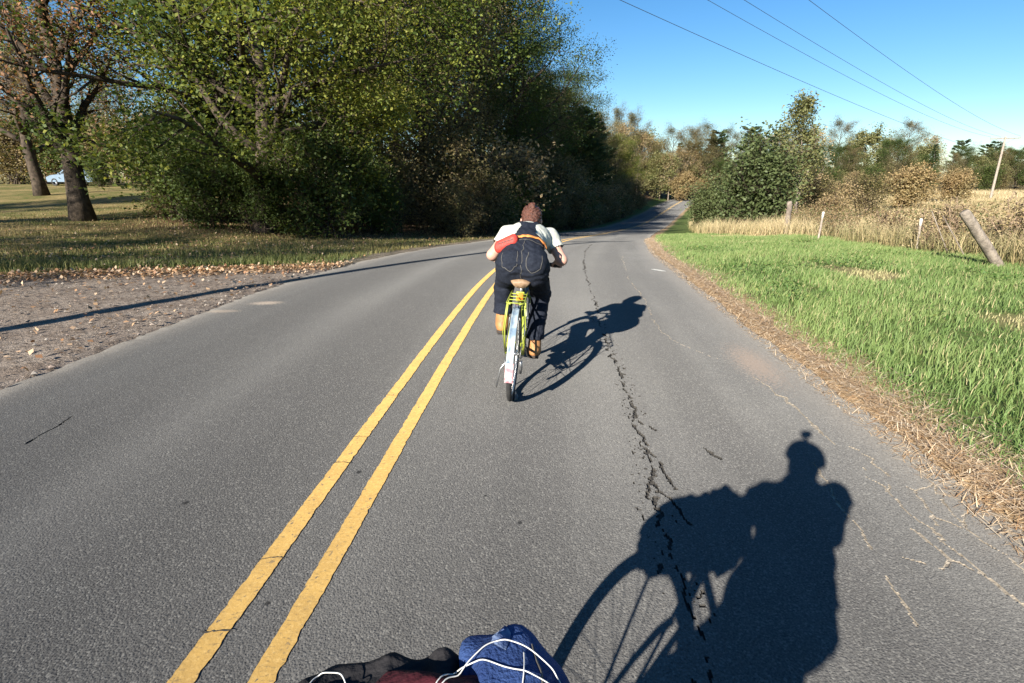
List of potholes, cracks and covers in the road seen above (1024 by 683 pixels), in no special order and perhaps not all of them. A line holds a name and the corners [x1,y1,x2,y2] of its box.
crack [621,255,1024,628]
crack [582,244,723,683]
crack [26,416,73,444]
